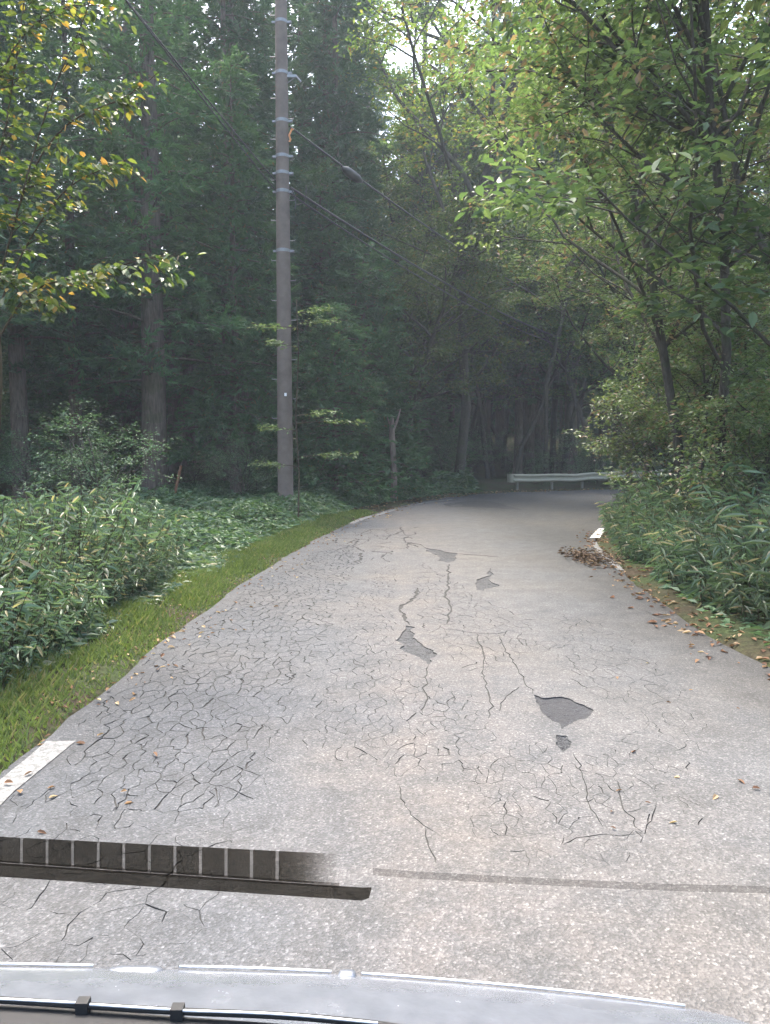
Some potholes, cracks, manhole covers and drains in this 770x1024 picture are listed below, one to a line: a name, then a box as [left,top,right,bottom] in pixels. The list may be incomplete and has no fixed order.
crack [549,613,710,754]
crack [453,728,703,868]
pothole [556,735,571,752]
pothole [396,626,437,666]
crack [335,527,423,563]
crack [297,554,557,784]
crack [399,786,436,863]
pothole [475,569,500,591]
pothole [424,547,457,563]
pothole [534,695,594,729]
crack [1,543,362,966]
